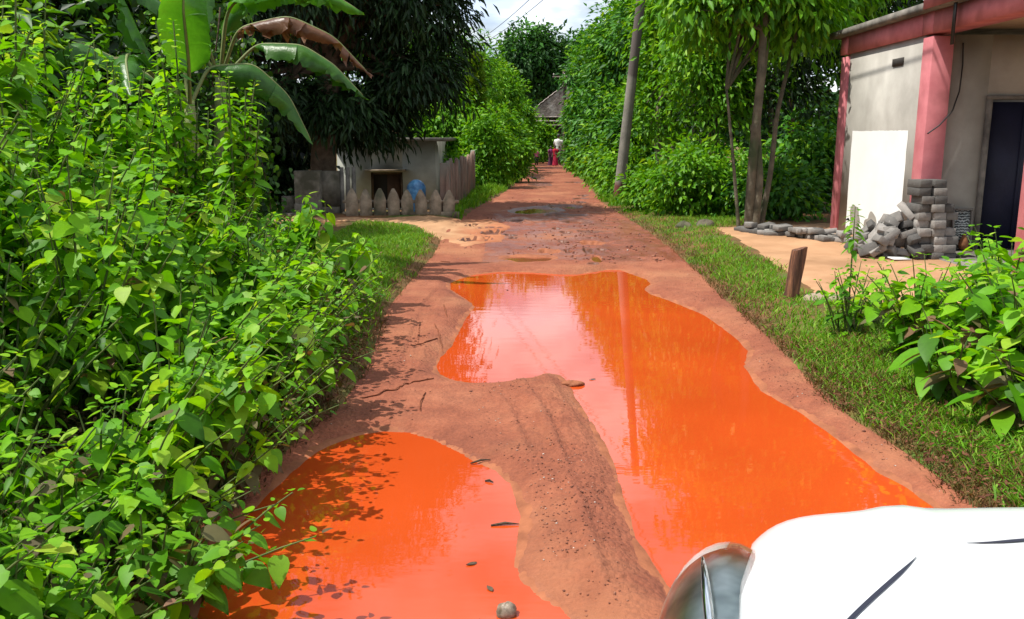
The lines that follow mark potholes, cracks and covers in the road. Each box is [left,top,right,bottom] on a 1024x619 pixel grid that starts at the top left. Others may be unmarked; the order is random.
pothole [498,254,558,263]
pothole [432,268,943,595]
crack [362,378,434,411]
pothole [507,206,565,214]
pothole [197,425,576,619]
